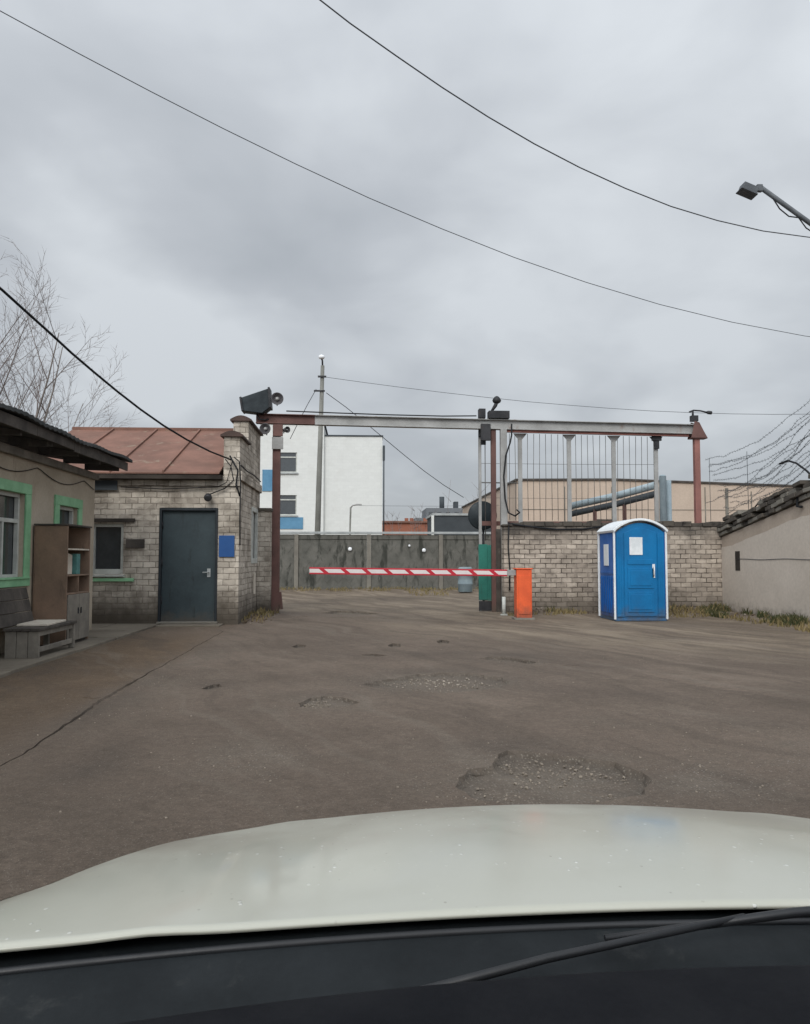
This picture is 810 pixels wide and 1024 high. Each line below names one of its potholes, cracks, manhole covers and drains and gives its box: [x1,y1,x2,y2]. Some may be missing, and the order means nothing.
pothole [362,672,509,693]
pothole [455,750,652,805]
pothole [298,696,359,709]
